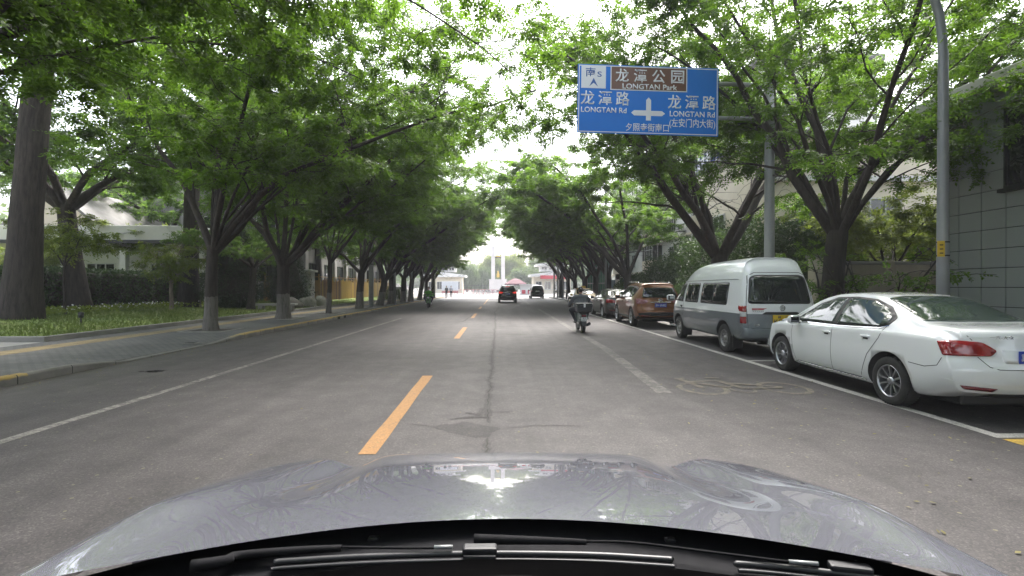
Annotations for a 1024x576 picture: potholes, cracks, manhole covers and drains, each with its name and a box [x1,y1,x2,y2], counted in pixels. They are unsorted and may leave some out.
crack [395,300,573,428]
